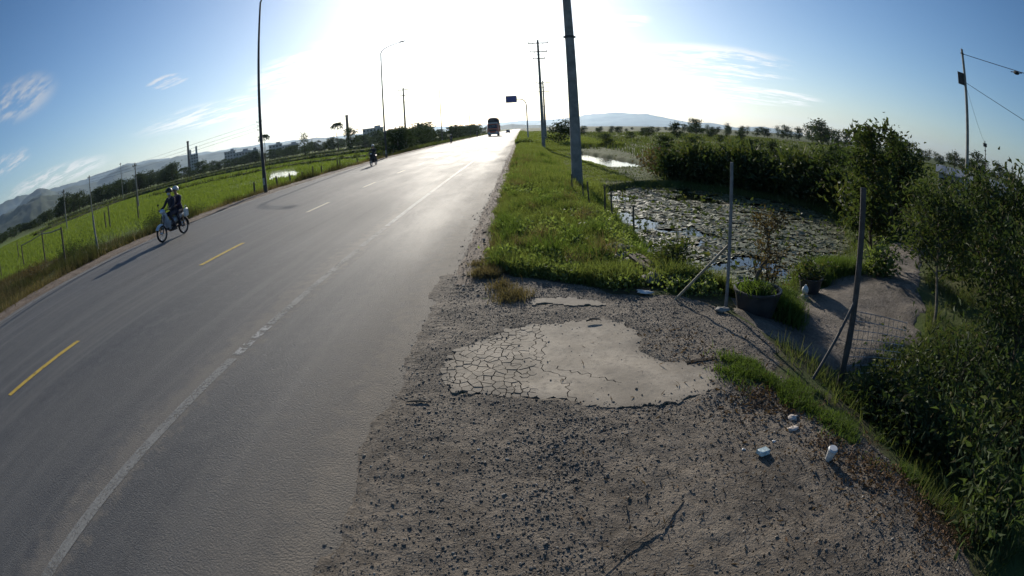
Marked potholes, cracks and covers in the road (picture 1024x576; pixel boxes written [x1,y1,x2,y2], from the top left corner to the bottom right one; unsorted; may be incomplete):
crack [685,357,716,371]
crack [447,329,607,401]
